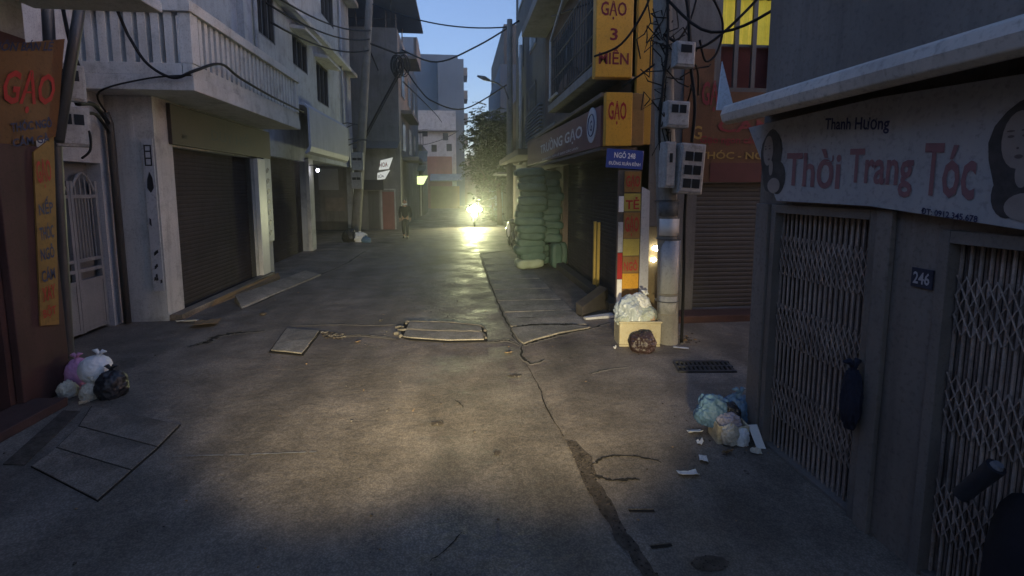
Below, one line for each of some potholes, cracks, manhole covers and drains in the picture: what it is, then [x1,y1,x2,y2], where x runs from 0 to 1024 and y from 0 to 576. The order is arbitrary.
crack [186,330,265,348]
crack [588,455,660,481]
drain grate [673,360,737,373]
crack [590,366,628,374]
